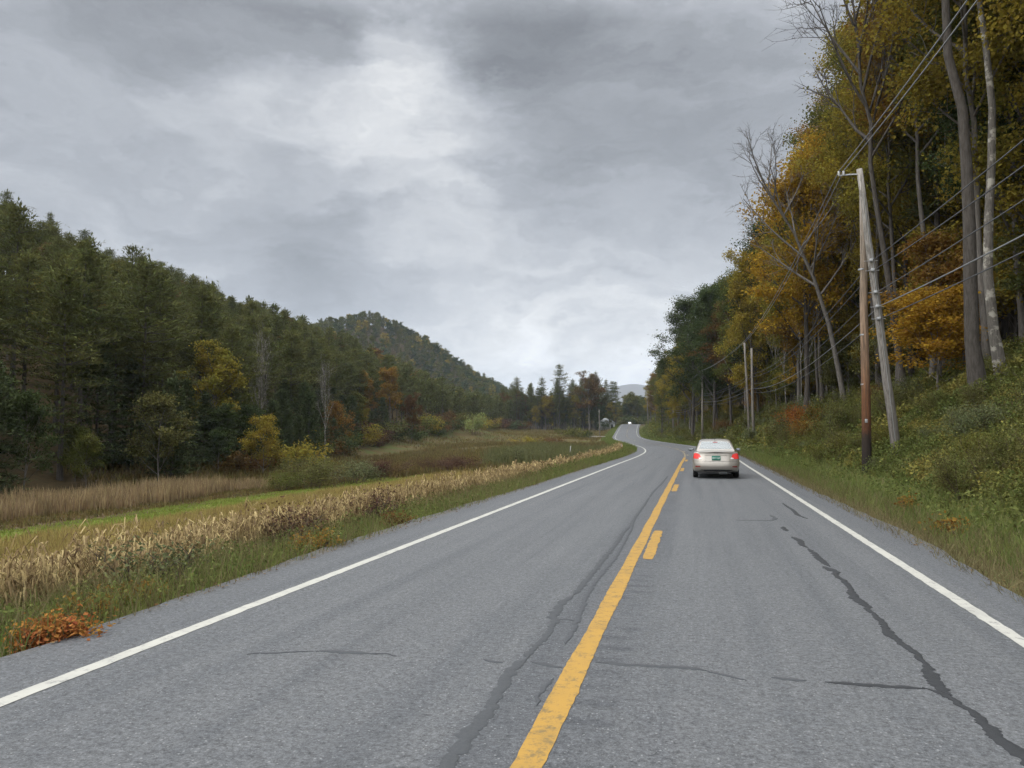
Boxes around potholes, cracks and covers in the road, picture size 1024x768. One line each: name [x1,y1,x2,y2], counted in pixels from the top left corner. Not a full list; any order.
crack [750,503,808,521]
crack [439,476,745,768]
